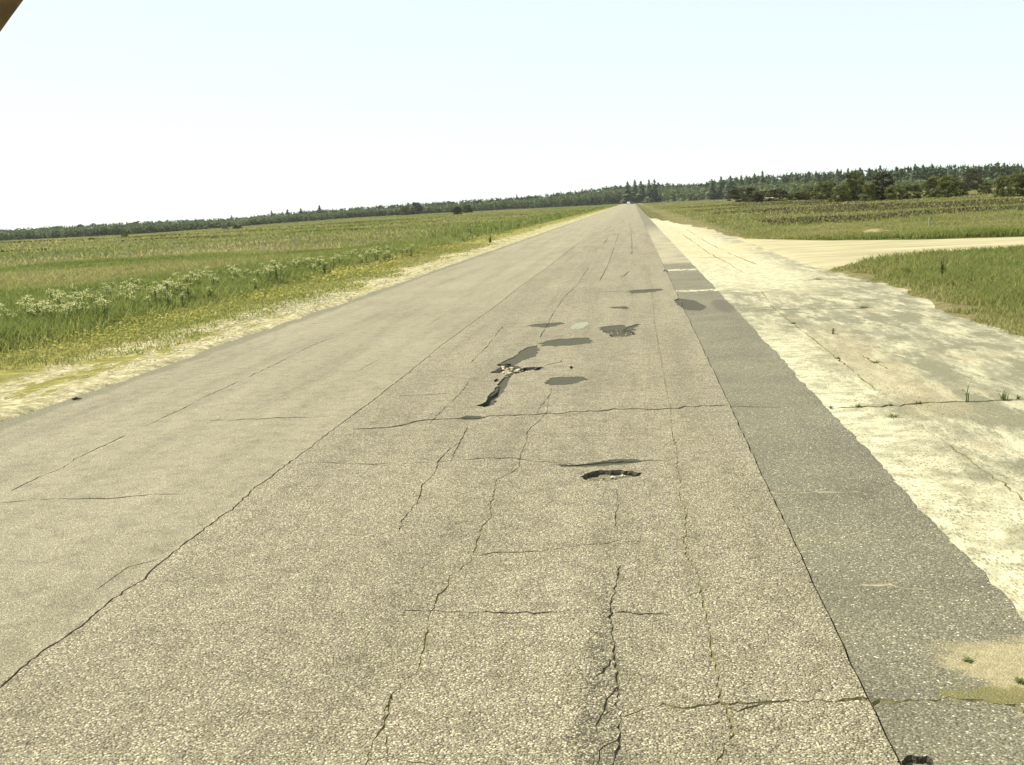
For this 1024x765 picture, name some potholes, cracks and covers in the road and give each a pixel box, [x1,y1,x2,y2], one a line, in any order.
pothole [581,470,641,481]
crack [318,275,1024,765]
pothole [600,324,641,337]
pothole [491,364,544,376]
crack [540,228,633,337]
pothole [477,376,511,407]
crack [0,335,338,503]
